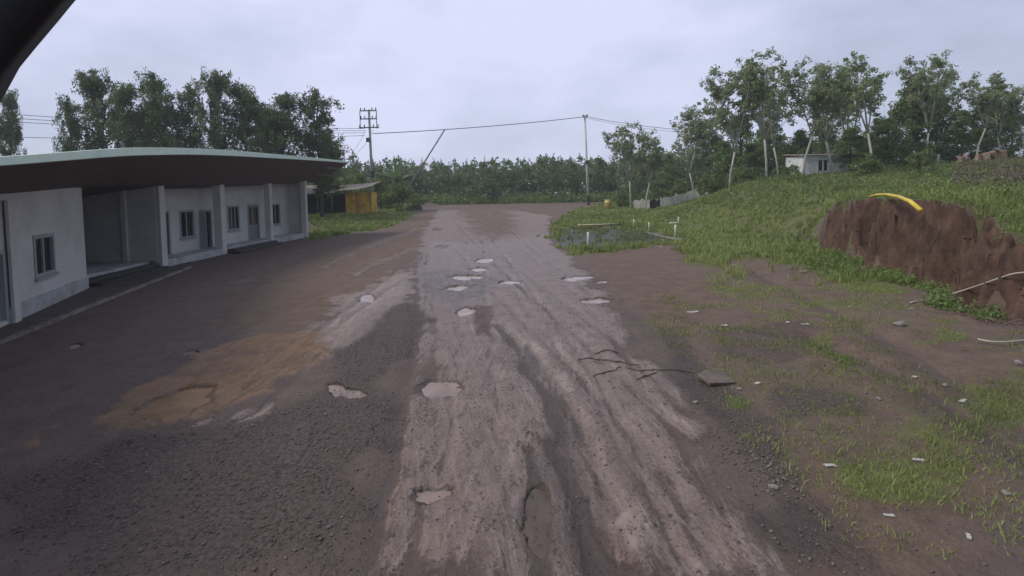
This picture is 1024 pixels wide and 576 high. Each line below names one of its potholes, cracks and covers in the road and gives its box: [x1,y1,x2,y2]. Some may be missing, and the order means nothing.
pothole [106,379,230,429]
pothole [443,304,489,320]
pothole [167,347,212,359]
pothole [436,273,495,283]
pothole [459,265,502,274]
pothole [499,473,575,575]
pothole [570,295,626,307]
pothole [462,256,507,265]
pothole [399,375,476,404]
pothole [552,274,606,284]
crack [578,349,694,379]
